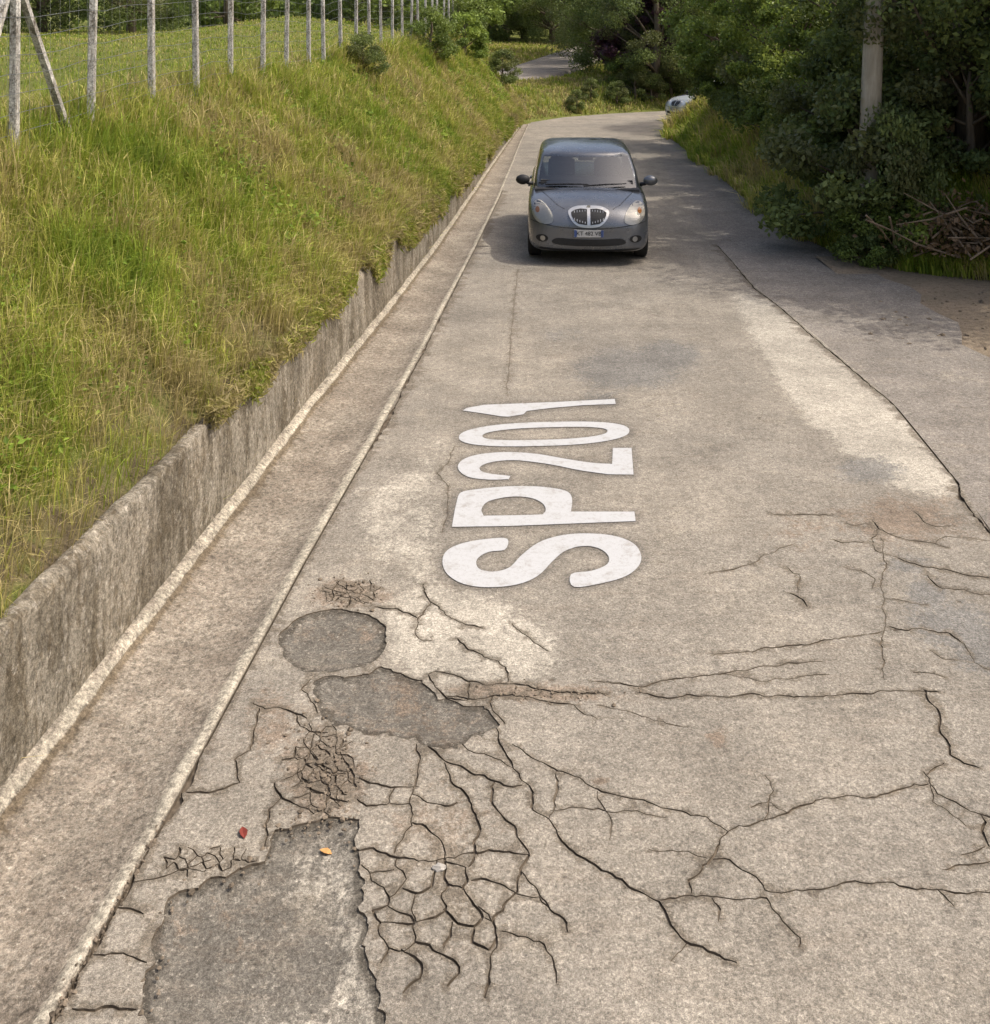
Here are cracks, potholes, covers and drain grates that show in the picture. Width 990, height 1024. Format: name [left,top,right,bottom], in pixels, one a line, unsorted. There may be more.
crack [134,514,990,998]
